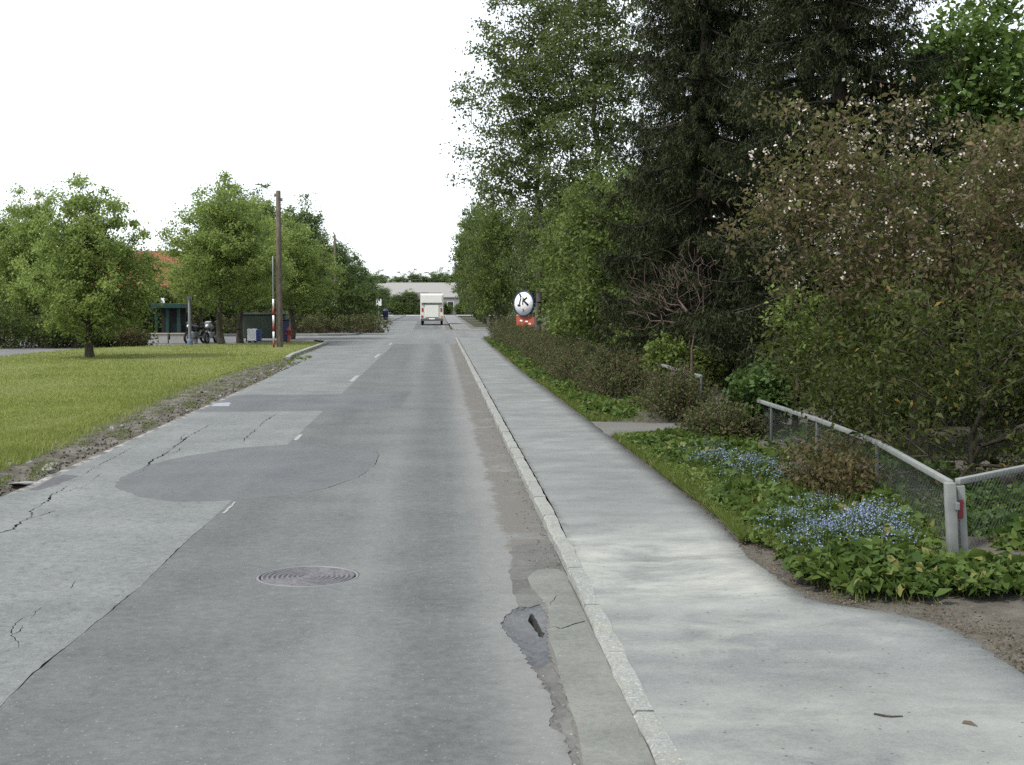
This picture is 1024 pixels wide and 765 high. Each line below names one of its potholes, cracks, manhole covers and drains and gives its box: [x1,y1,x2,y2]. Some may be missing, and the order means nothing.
crack [0,425,209,533]
manhole cover [256,566,359,587]
pothole [500,604,551,668]
